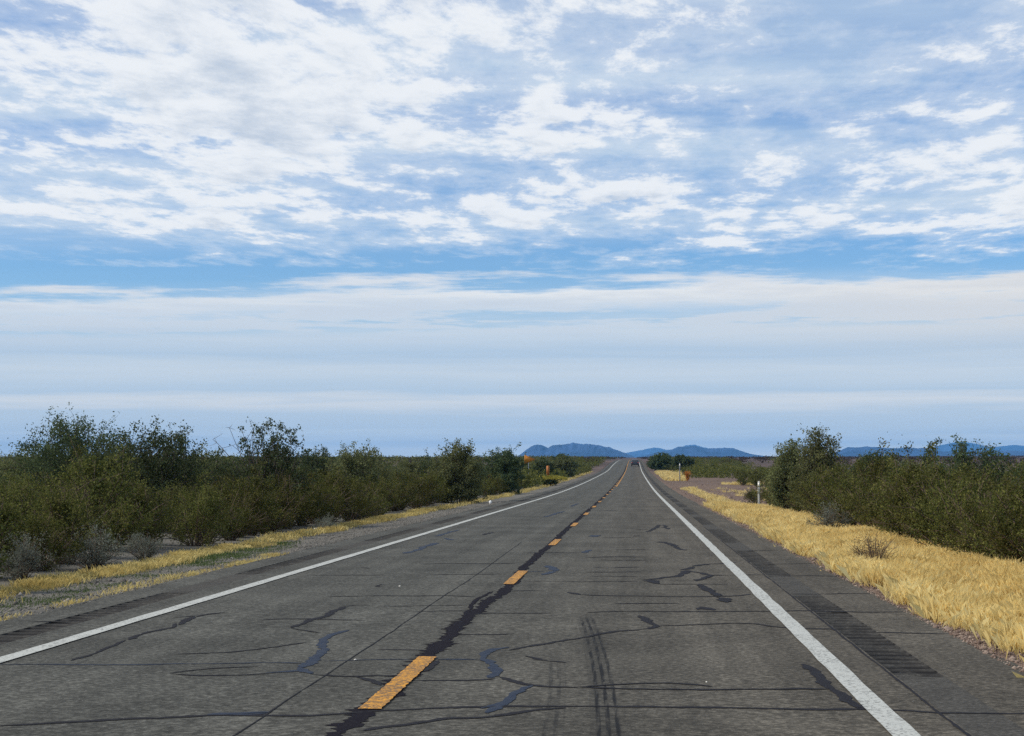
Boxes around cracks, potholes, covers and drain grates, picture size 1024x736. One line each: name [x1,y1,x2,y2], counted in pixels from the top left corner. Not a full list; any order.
crack [52,465,905,736]
